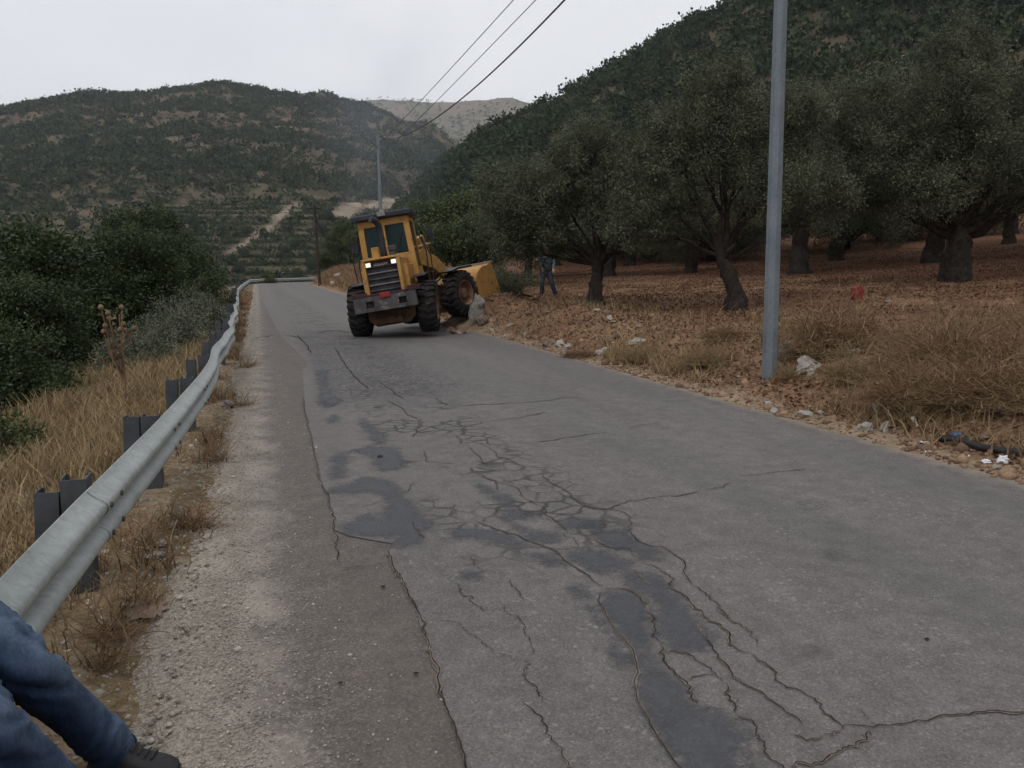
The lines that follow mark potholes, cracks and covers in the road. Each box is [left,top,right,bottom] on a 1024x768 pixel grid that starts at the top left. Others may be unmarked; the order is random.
crack [252,331,1024,768]
